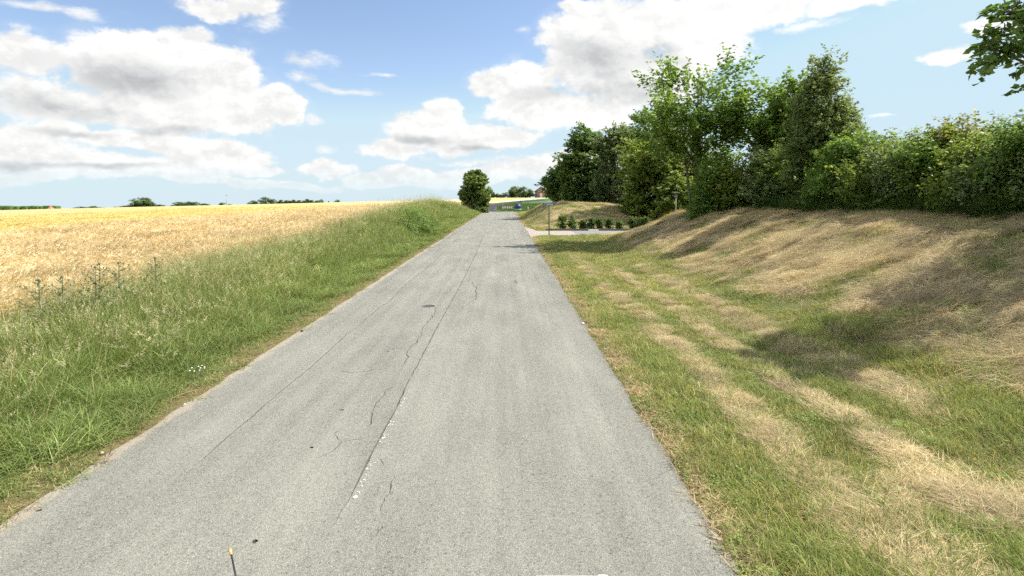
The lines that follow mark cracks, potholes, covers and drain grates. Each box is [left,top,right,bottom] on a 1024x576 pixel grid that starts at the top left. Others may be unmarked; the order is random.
crack [387,278,477,370]
crack [186,241,457,474]
